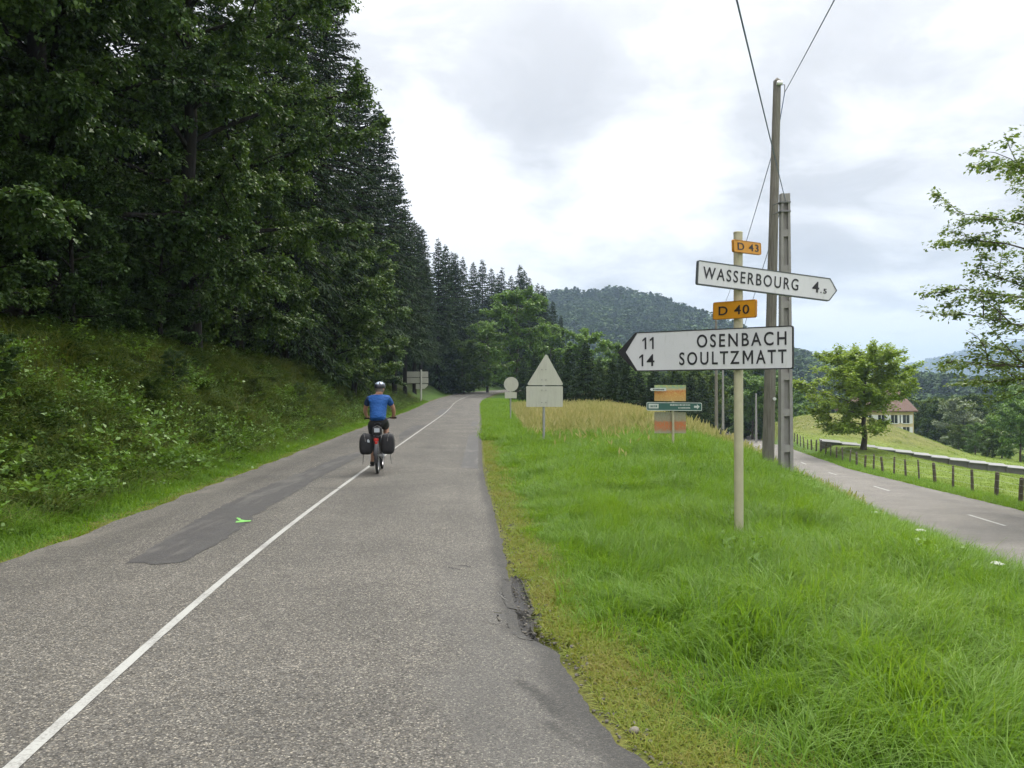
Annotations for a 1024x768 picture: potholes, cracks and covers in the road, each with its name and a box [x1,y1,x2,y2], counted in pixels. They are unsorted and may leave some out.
pothole [502,575,535,615]
